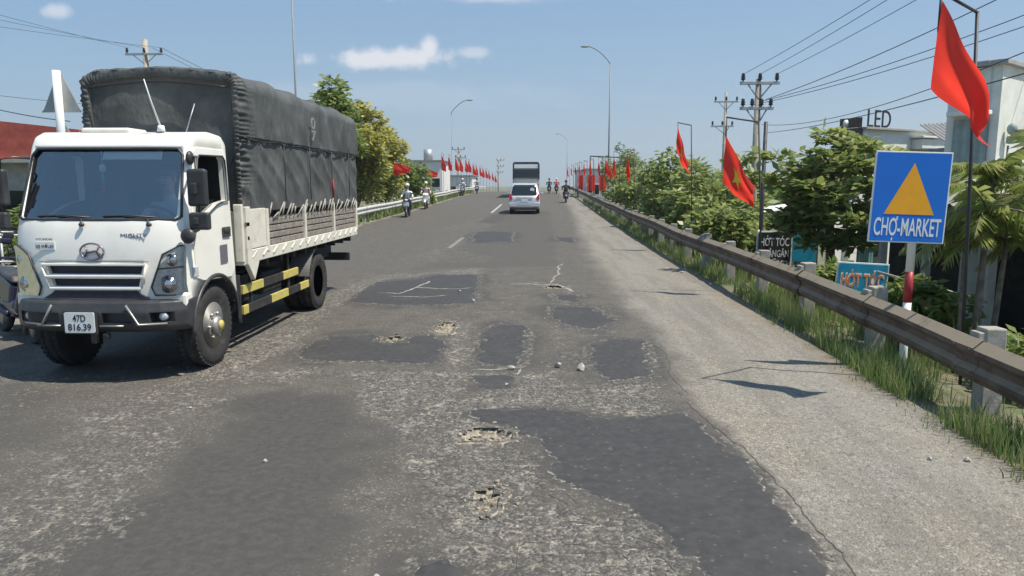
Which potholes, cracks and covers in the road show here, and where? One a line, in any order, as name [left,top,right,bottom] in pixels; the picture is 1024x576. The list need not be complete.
pothole [422,319,459,335]
crack [393,281,465,297]
pothole [376,333,411,344]
pothole [444,421,529,447]
pothole [460,479,521,519]
